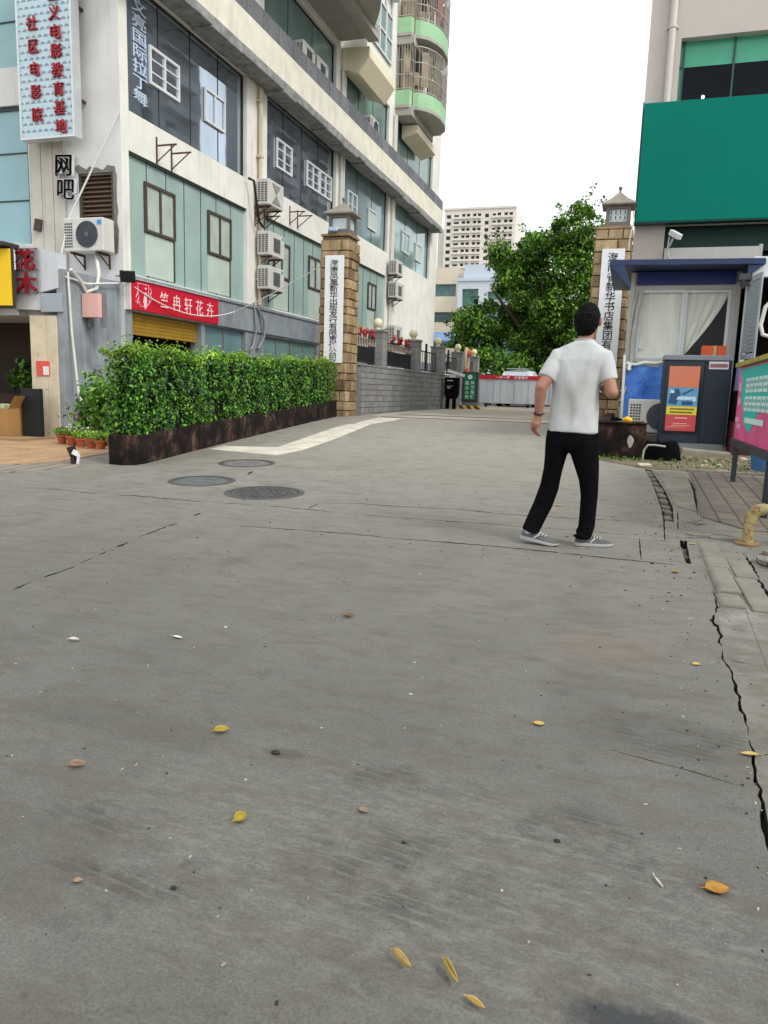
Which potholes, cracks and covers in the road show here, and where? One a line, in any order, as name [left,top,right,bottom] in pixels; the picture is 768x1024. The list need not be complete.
manhole cover [167,476,236,486]
crack [612,750,732,784]
crack [13,488,200,590]
crack [710,591,768,850]
crack [688,520,768,597]
manhole cover [223,486,305,506]
manhole cover [218,459,275,472]
